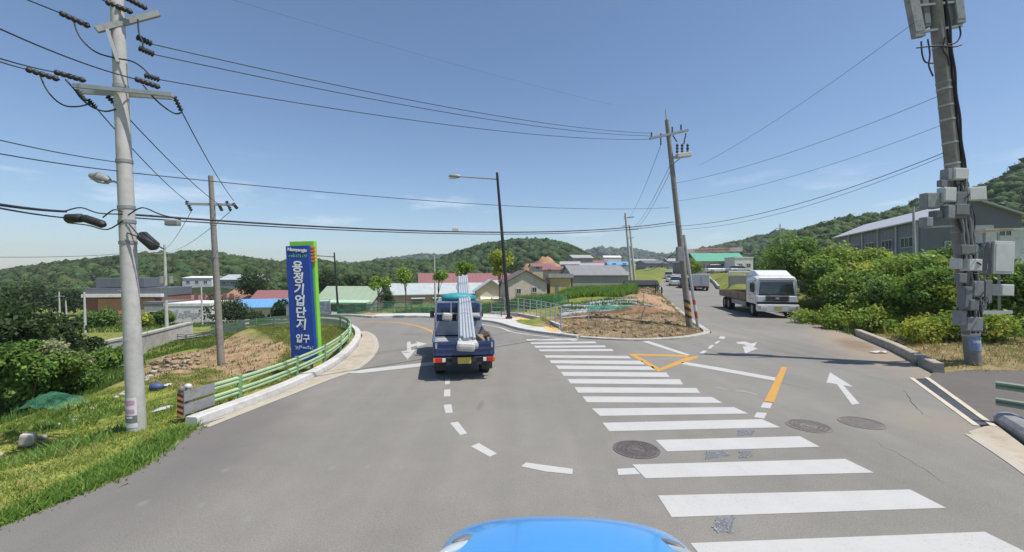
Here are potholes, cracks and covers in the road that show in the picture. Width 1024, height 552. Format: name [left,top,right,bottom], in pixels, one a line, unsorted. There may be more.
manhole cover [785,419,834,433]
manhole cover [613,440,660,459]
manhole cover [837,416,887,430]
